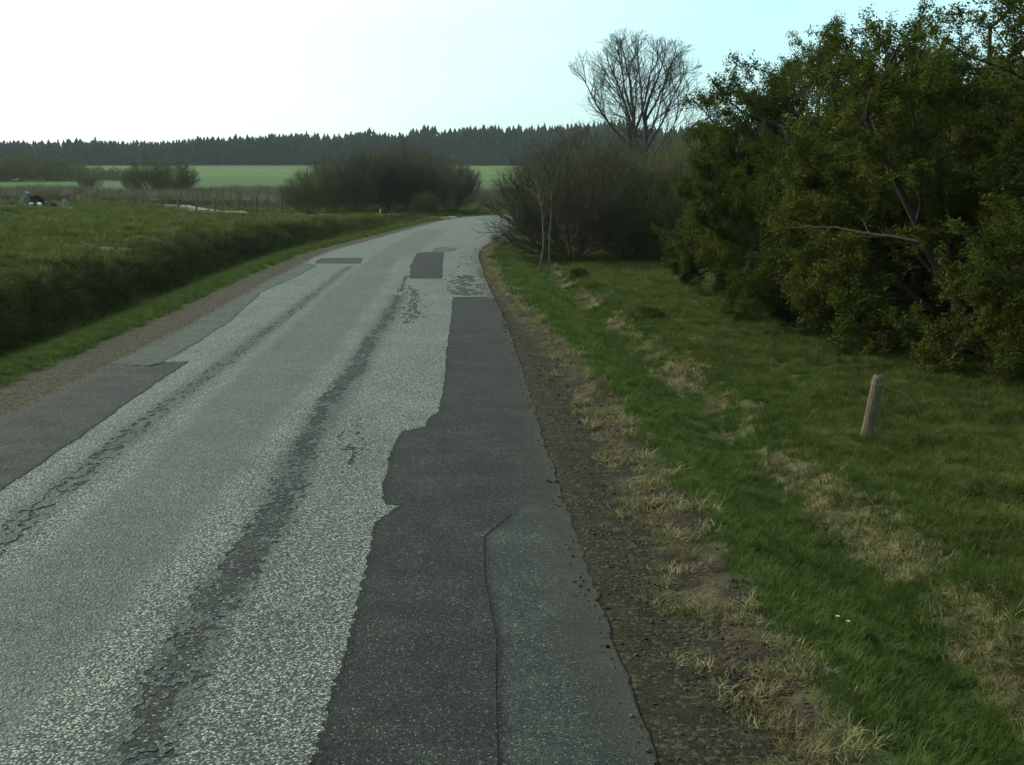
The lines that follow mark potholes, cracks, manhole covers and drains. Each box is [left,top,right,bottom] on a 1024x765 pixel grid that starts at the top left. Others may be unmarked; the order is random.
crack [446,275,486,297]
crack [104,276,429,765]
crack [0,267,350,557]
